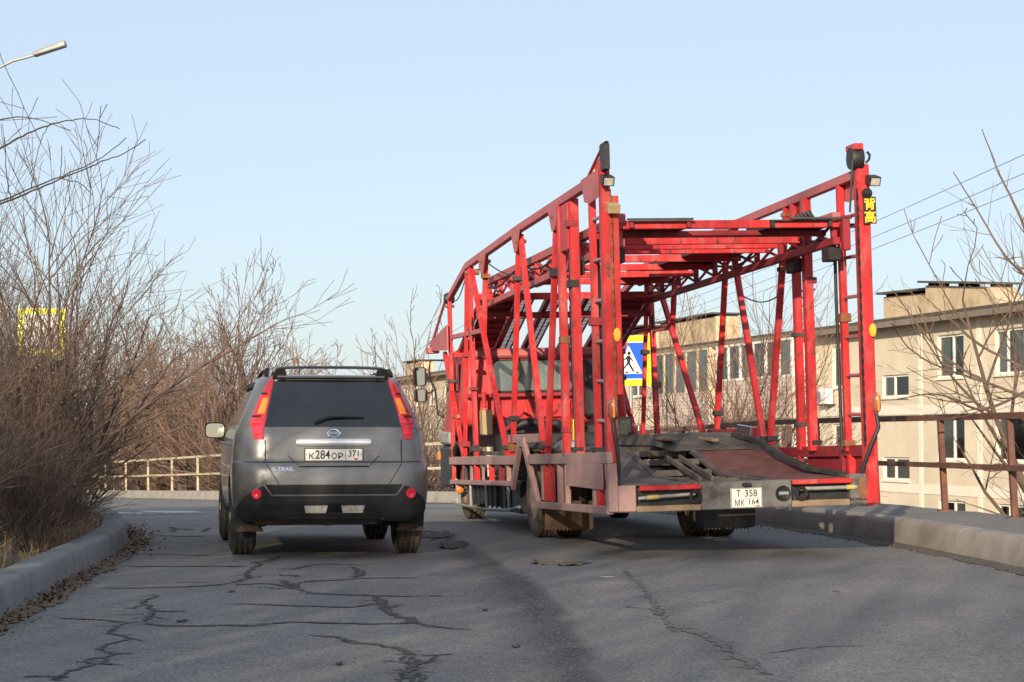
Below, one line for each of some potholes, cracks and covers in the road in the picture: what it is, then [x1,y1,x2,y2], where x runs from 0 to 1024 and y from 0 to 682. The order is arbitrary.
pothole [422,530,455,539]
crack [770,644,881,653]
pothole [439,540,469,549]
crack [25,554,474,682]
pothole [530,558,590,566]
